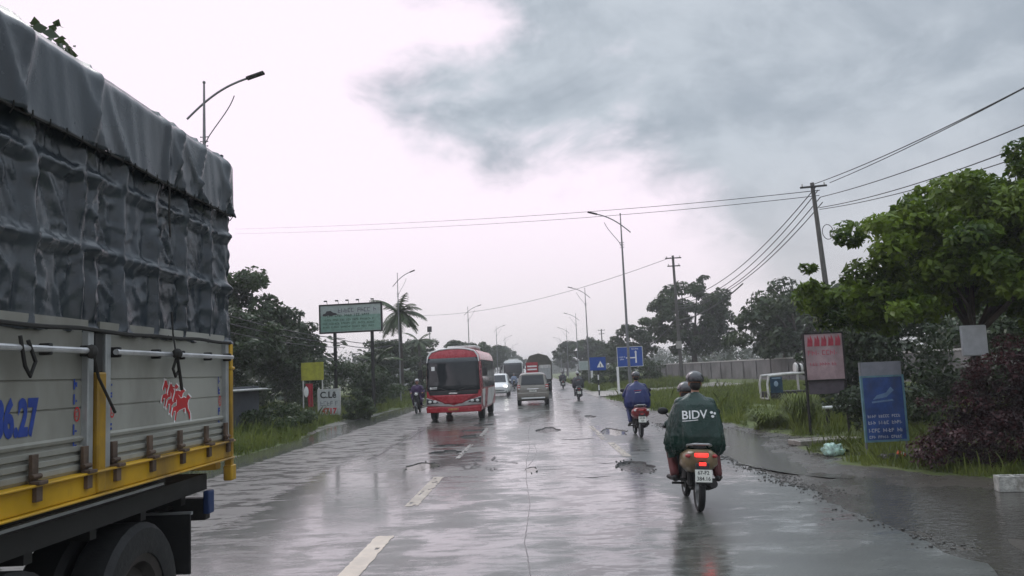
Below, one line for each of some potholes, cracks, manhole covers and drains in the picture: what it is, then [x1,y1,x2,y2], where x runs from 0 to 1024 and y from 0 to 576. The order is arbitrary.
crack [460,426,537,576]
pothole [600,428,628,436]
pothole [615,459,657,474]
